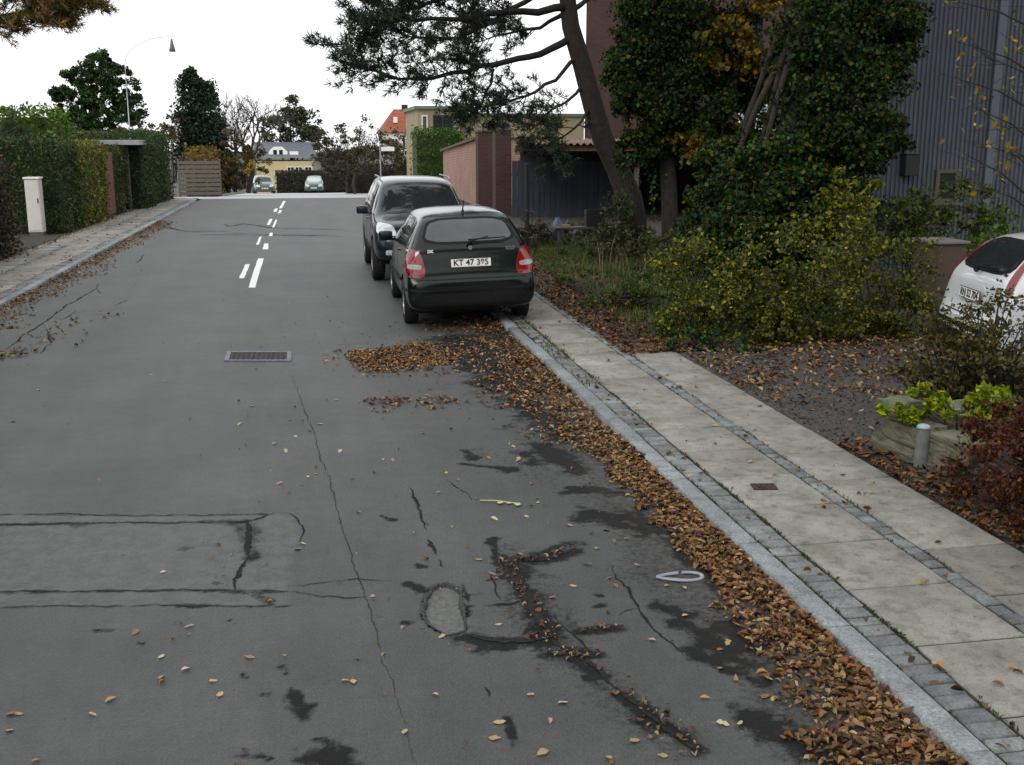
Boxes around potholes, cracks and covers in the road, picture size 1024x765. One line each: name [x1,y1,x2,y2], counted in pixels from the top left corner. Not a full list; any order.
crack [291,382,415,761]
crack [0,284,100,359]
crack [410,487,443,567]
pothole [419,582,467,636]
crack [468,543,693,748]
